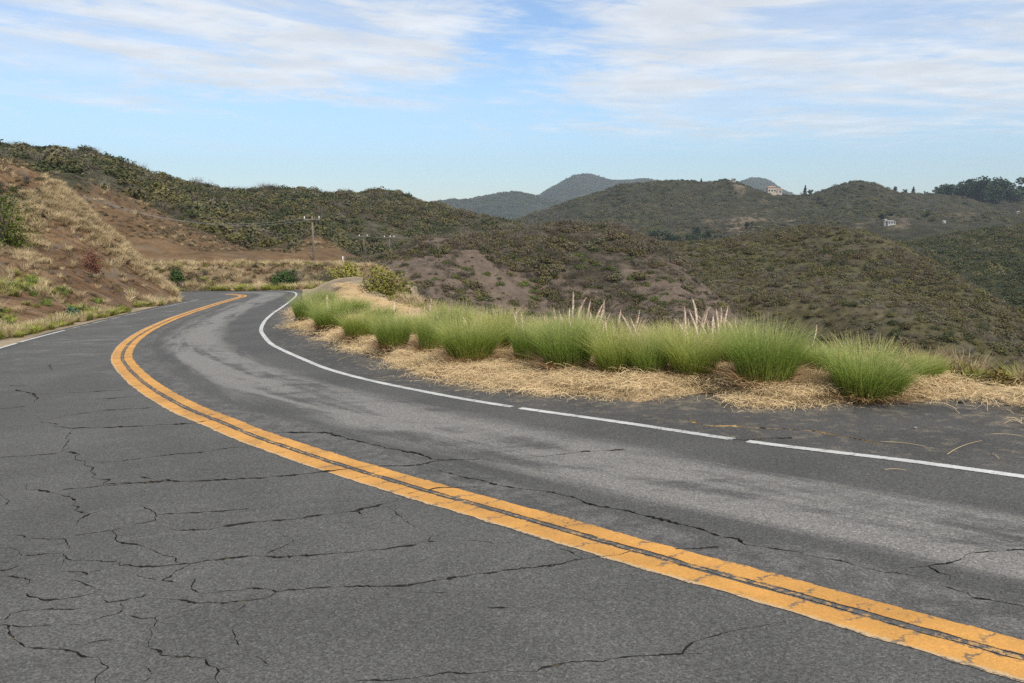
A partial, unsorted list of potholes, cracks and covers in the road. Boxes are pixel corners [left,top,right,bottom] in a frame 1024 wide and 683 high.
crack [0,390,633,683]
crack [343,621,785,683]
crack [688,420,878,444]
crack [284,431,1024,607]
